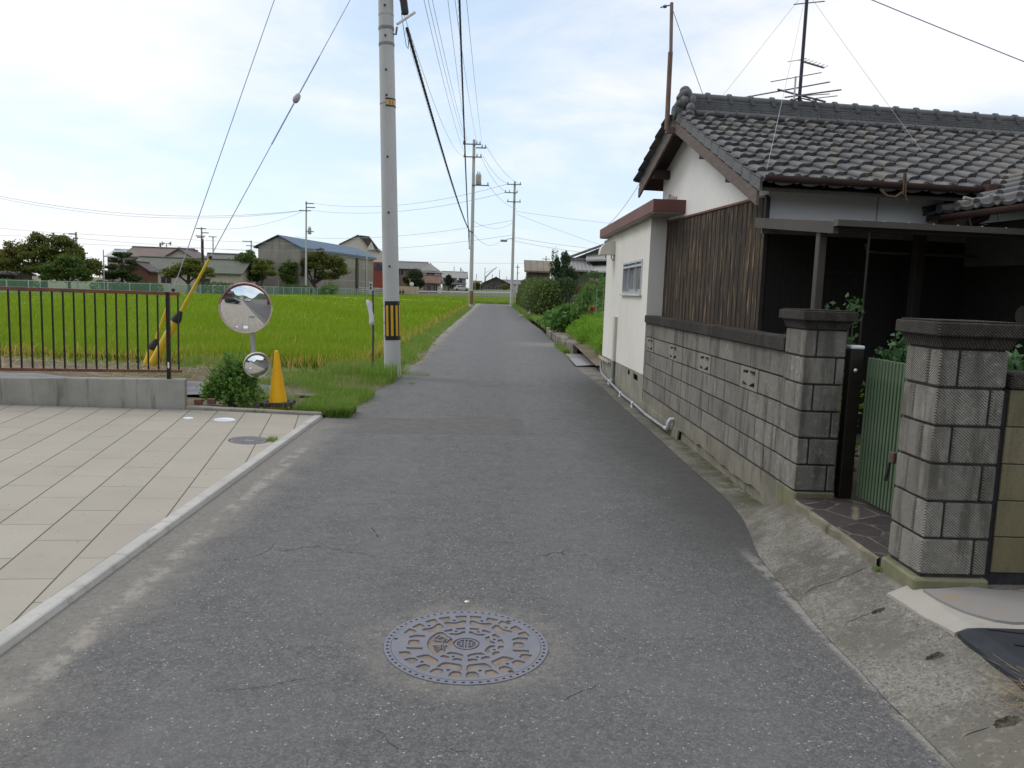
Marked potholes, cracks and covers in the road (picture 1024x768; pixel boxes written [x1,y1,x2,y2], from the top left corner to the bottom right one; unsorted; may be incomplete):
crack [217,543,376,561]
manhole cover [228,436,269,444]
manhole cover [383,611,548,686]
